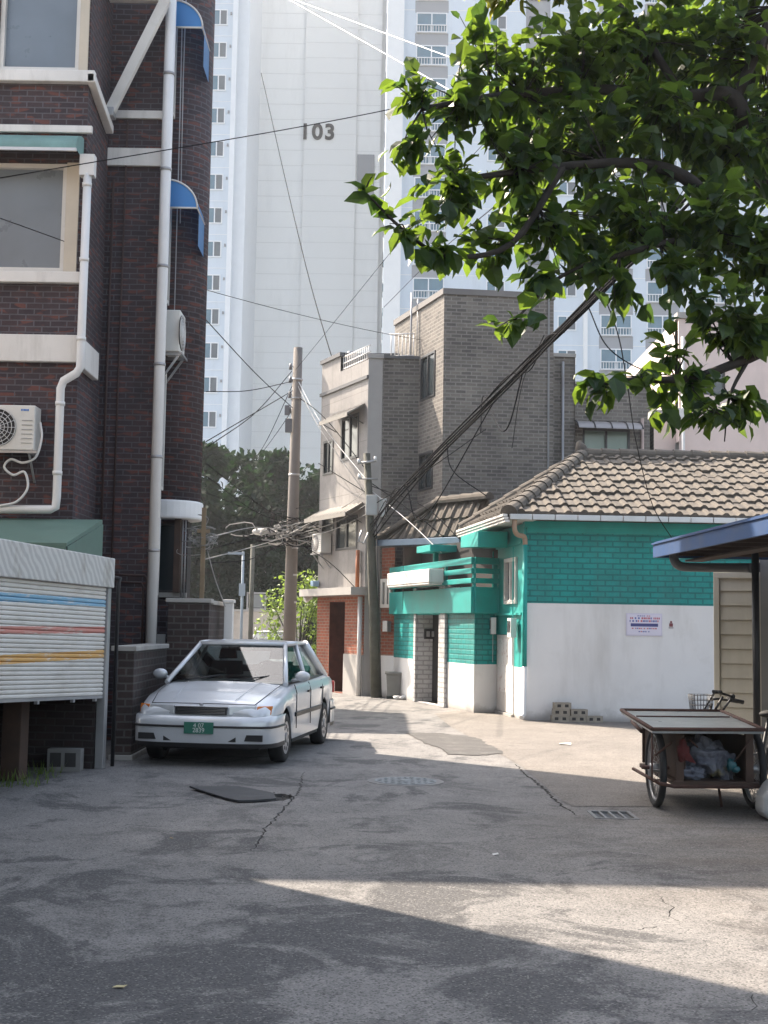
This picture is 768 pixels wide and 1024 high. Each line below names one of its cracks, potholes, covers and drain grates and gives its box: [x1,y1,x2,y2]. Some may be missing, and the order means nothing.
crack [250,772,305,851]
drain grate [587,810,640,820]
manhole cover [367,776,444,786]
